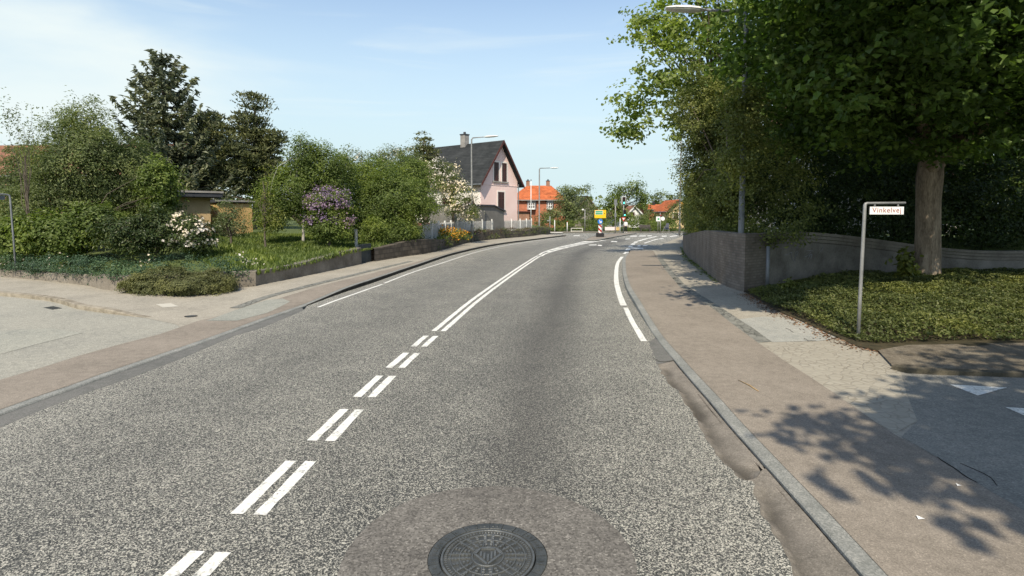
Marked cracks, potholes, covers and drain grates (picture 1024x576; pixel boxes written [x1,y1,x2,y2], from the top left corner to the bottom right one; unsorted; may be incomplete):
manhole cover [427,523,548,576]
crack [938,457,997,485]
